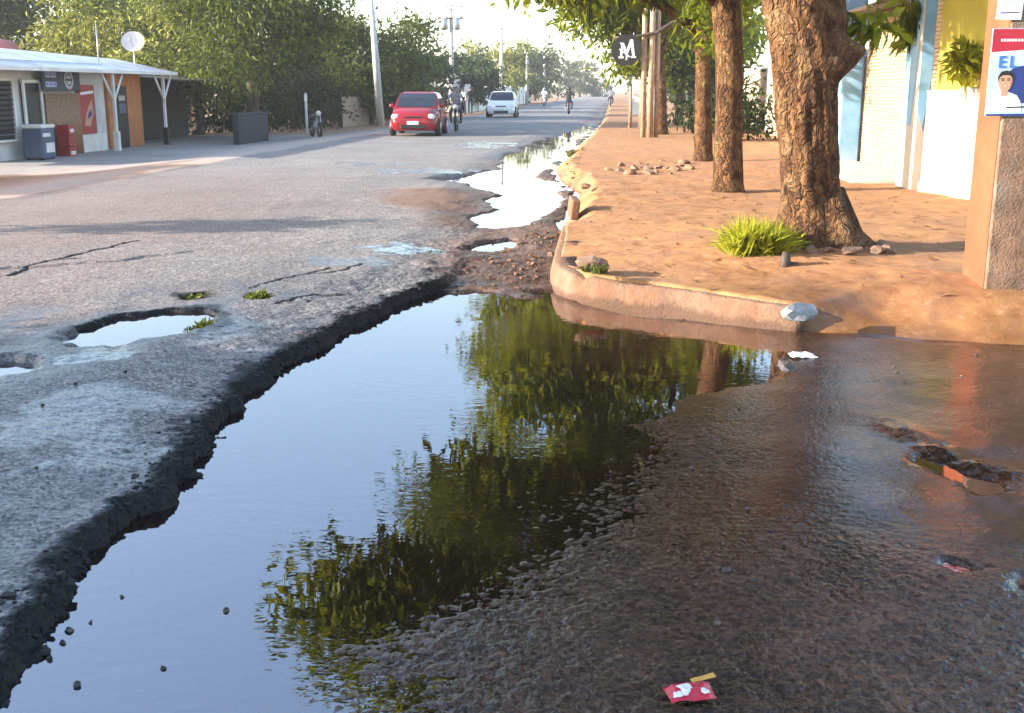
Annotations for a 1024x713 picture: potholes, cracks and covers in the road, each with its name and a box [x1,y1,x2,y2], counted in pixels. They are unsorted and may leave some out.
pothole [900,445,1018,497]
crack [249,263,364,304]
crack [6,240,141,276]
pothole [424,126,595,229]
pothole [455,237,535,252]
pothole [928,553,999,574]
pothole [0,289,749,705]
